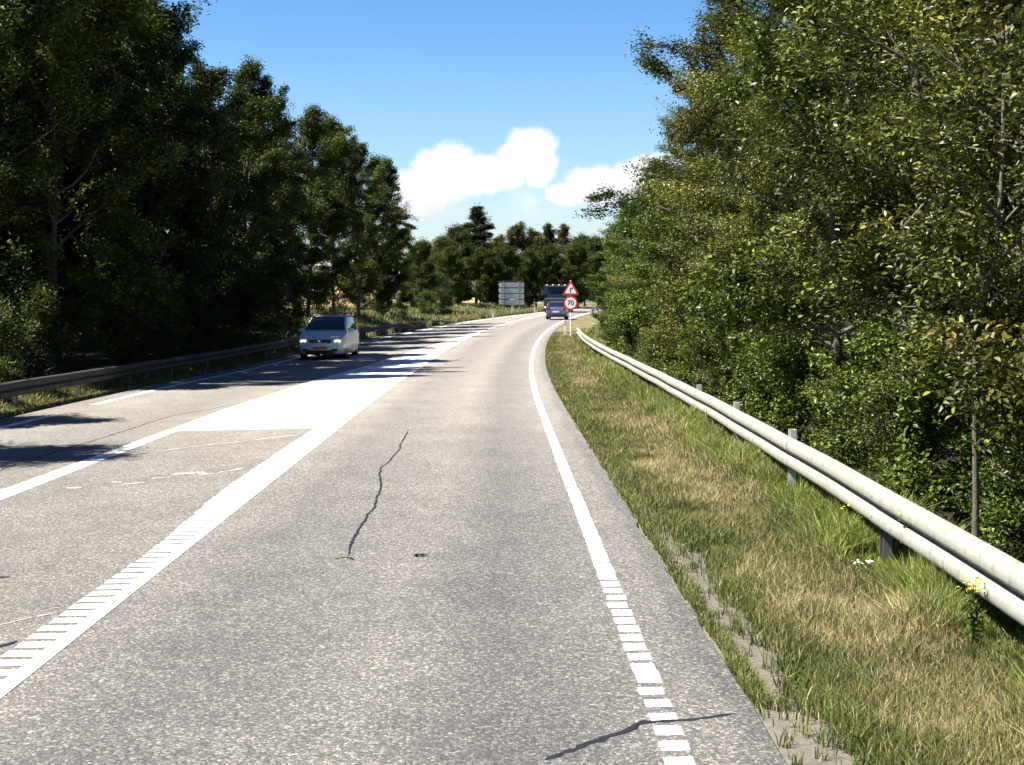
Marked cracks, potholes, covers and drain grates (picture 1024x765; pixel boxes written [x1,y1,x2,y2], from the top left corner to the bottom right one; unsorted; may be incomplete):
crack [545,713,736,760]
crack [335,429,409,560]
